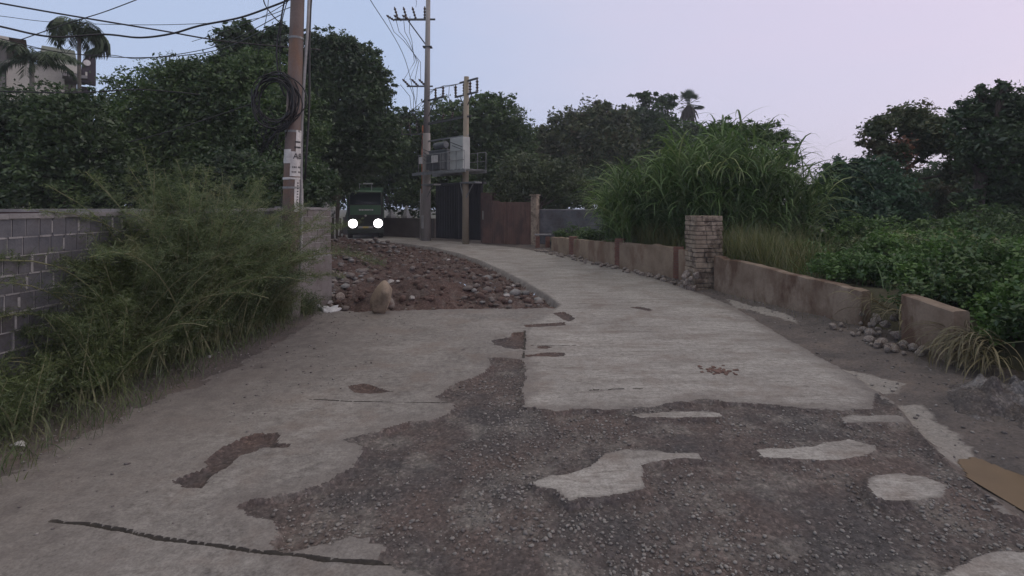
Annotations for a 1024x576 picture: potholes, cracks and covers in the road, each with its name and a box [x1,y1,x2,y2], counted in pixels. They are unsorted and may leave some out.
pothole [236,357,1024,576]
pothole [172,432,290,488]
pothole [491,332,527,349]
pothole [553,312,575,321]
